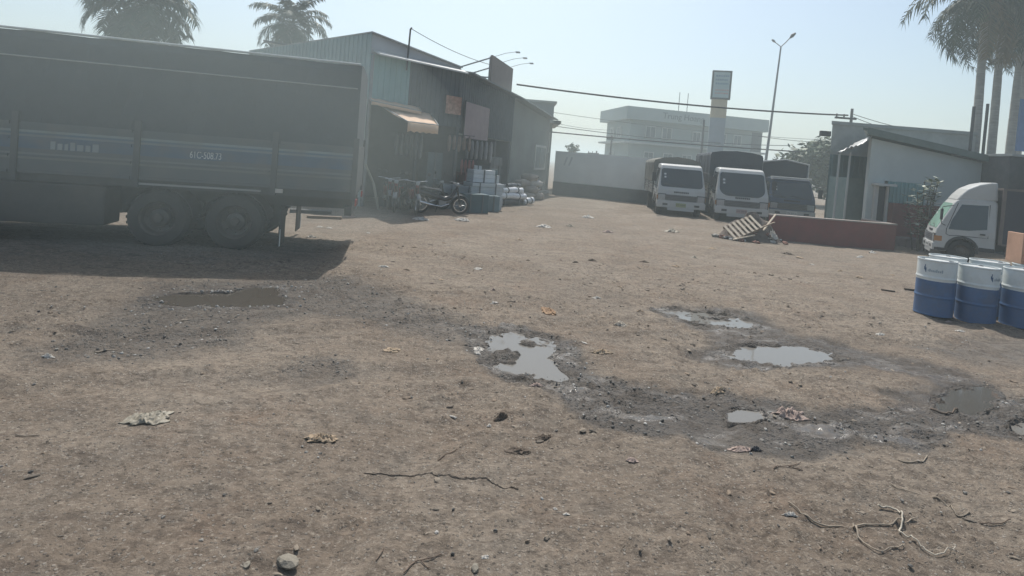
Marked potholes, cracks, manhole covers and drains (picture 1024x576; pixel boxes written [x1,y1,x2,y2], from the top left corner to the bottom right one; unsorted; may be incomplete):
pothole [474,322,582,395]
pothole [711,341,851,369]
pothole [136,285,299,310]
pothole [927,383,1007,422]
pothole [649,306,763,330]
pothole [723,406,773,427]
